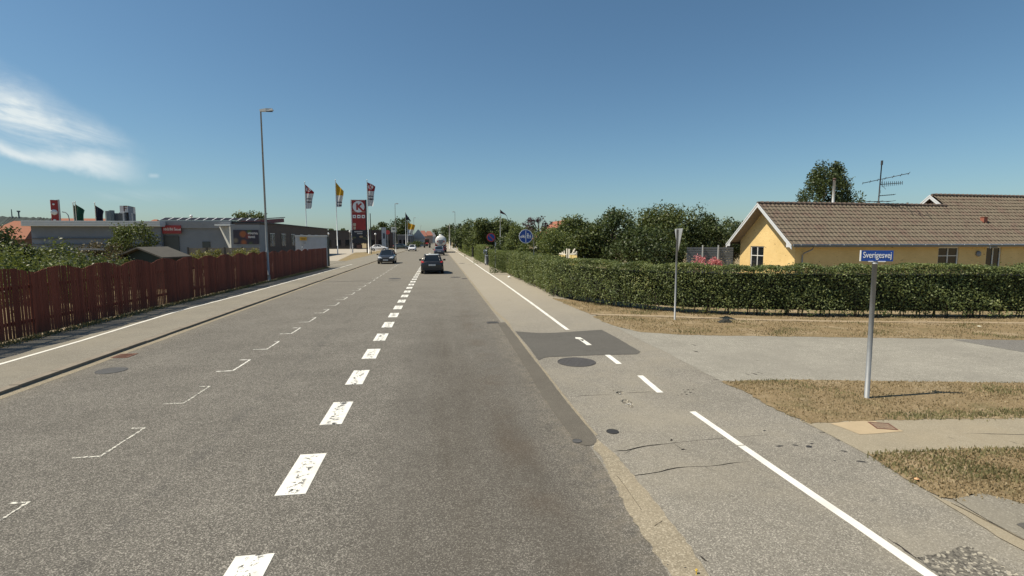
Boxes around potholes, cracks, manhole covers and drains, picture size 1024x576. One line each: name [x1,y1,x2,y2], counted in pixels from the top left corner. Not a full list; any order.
utility cover [868,422,898,430]
manhole cover [557,357,596,367]
crack [617,435,759,526]
